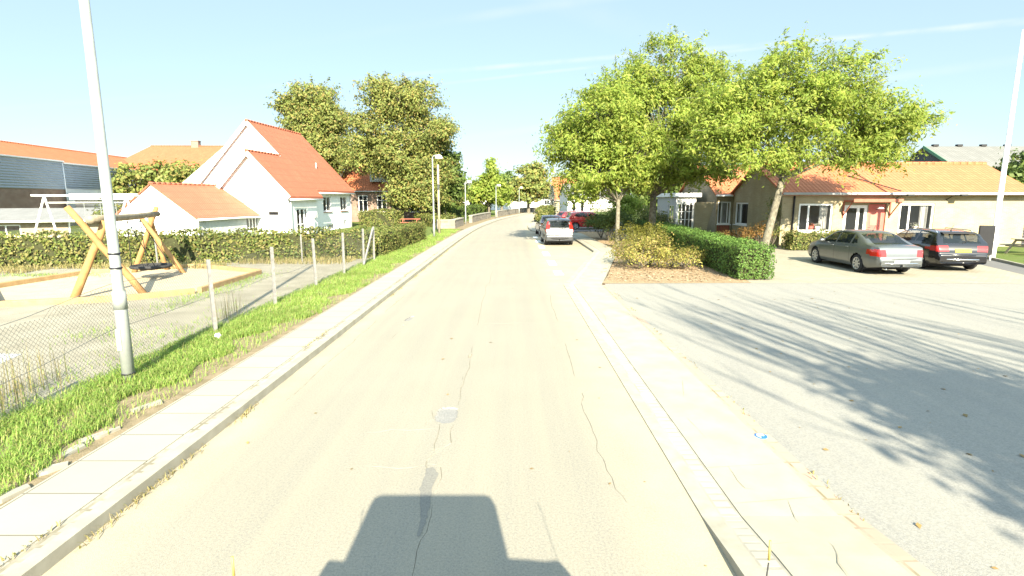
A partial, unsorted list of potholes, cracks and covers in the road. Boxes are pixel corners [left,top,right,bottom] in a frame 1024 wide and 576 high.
crack [565,344,626,501]
